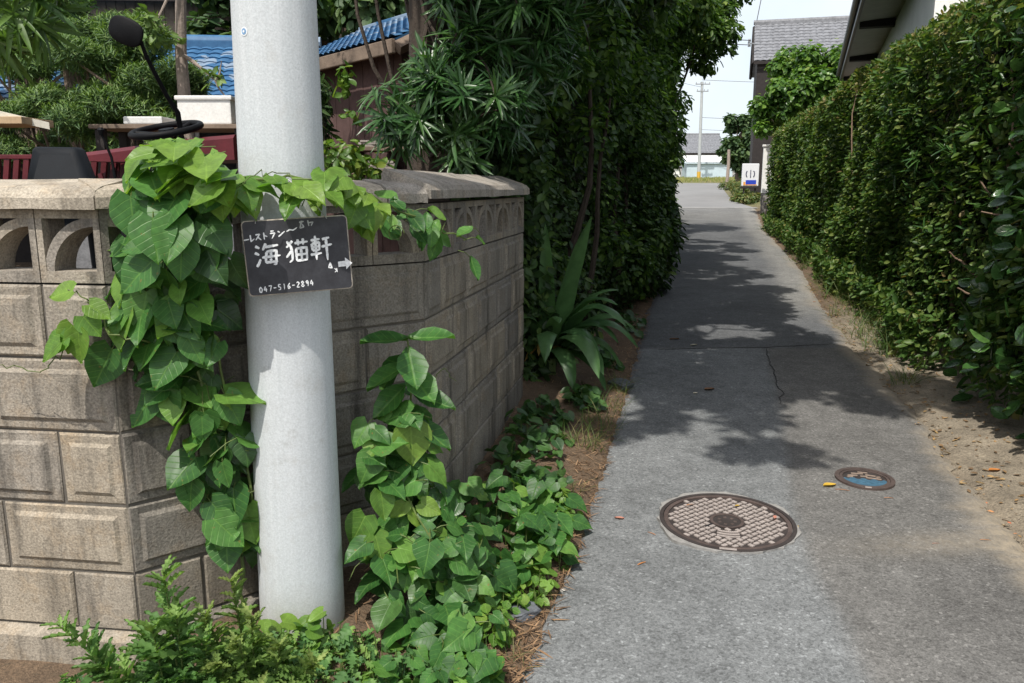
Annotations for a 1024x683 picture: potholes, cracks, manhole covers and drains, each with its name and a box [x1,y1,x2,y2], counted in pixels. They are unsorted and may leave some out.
manhole cover [657,491,802,554]
manhole cover [834,467,896,491]
